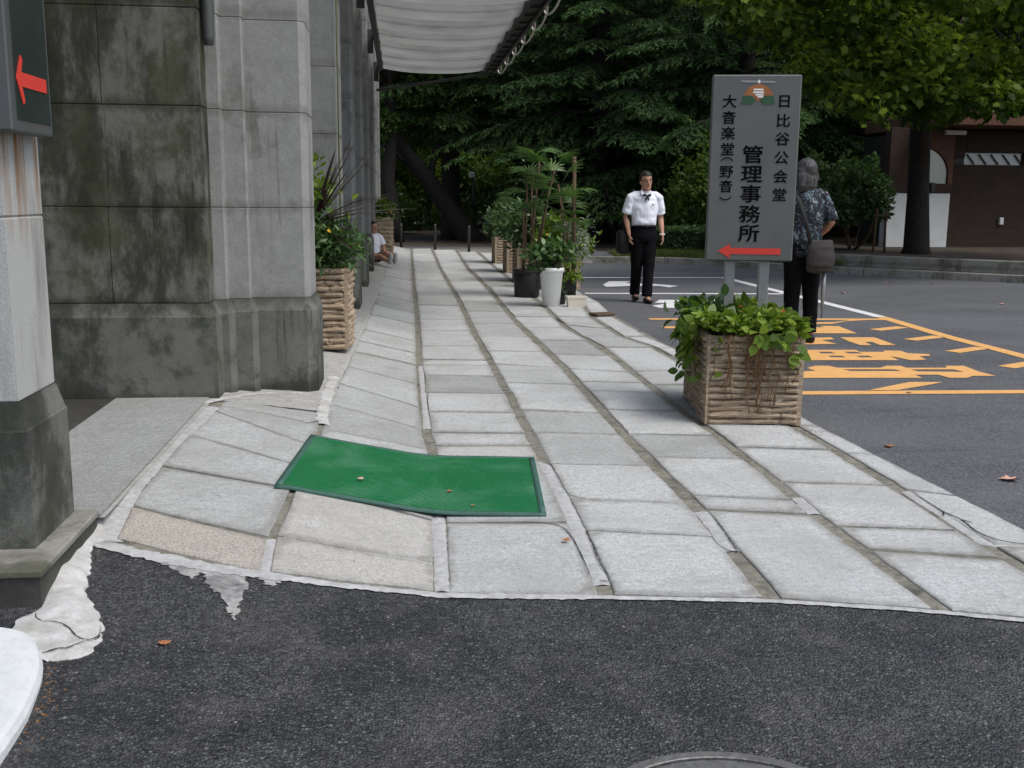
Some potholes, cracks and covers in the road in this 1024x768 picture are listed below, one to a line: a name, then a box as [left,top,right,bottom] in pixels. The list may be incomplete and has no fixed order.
manhole cover [627,751,806,768]
crack [35,613,101,653]
crack [913,491,1024,544]
